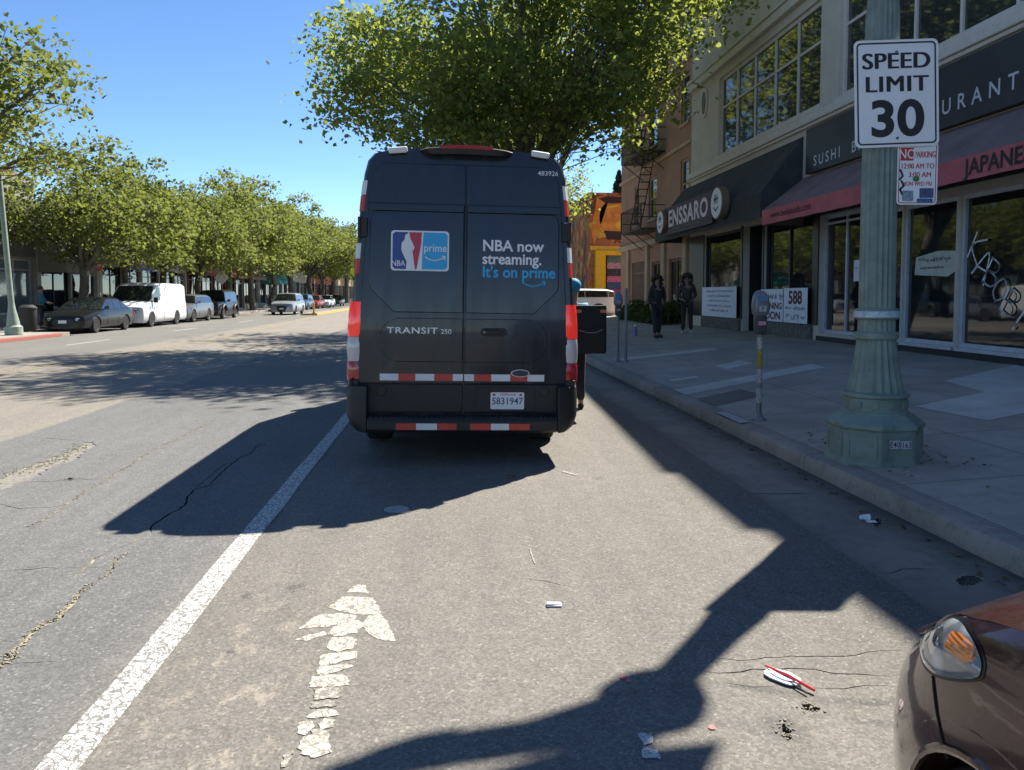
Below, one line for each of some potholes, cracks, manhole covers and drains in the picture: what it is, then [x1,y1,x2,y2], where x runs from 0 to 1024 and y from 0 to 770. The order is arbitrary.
crack [0,445,259,666]
crack [710,650,893,689]
crack [0,421,212,528]
manhole cover [380,505,413,514]
